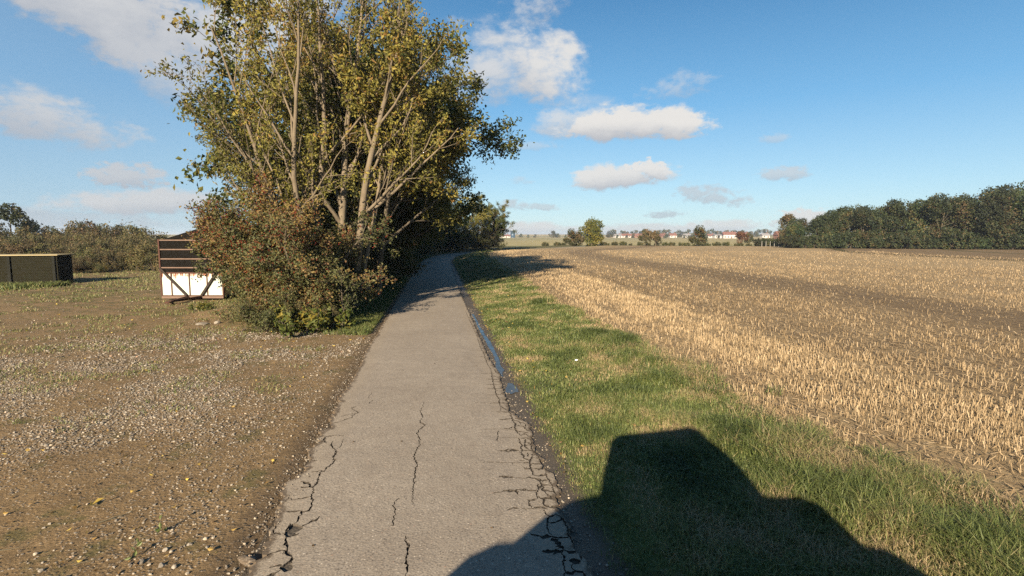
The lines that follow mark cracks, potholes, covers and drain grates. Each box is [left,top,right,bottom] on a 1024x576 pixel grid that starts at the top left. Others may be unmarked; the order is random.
crack [466,312,586,576]
crack [267,393,373,576]
crack [391,404,426,576]
